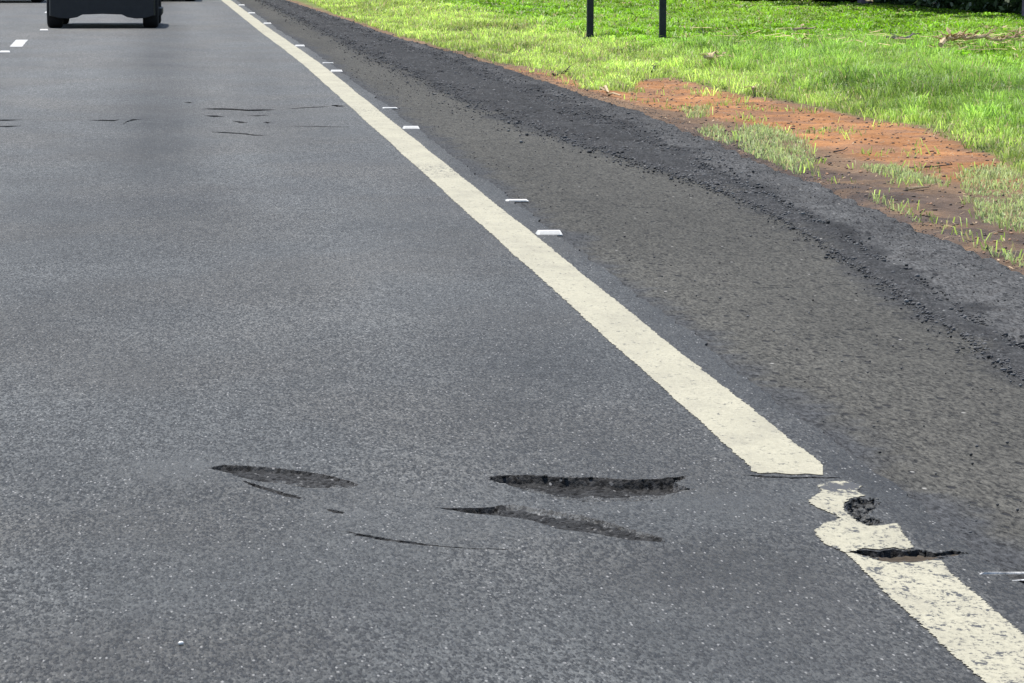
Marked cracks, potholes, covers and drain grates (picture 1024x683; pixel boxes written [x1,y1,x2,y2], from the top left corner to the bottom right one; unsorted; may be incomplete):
pothole [209,465,359,488]
pothole [434,504,665,542]
pothole [843,497,884,526]
crack [244,481,346,514]
crack [346,531,508,550]
pothole [487,474,696,502]
crack [184,102,343,136]
